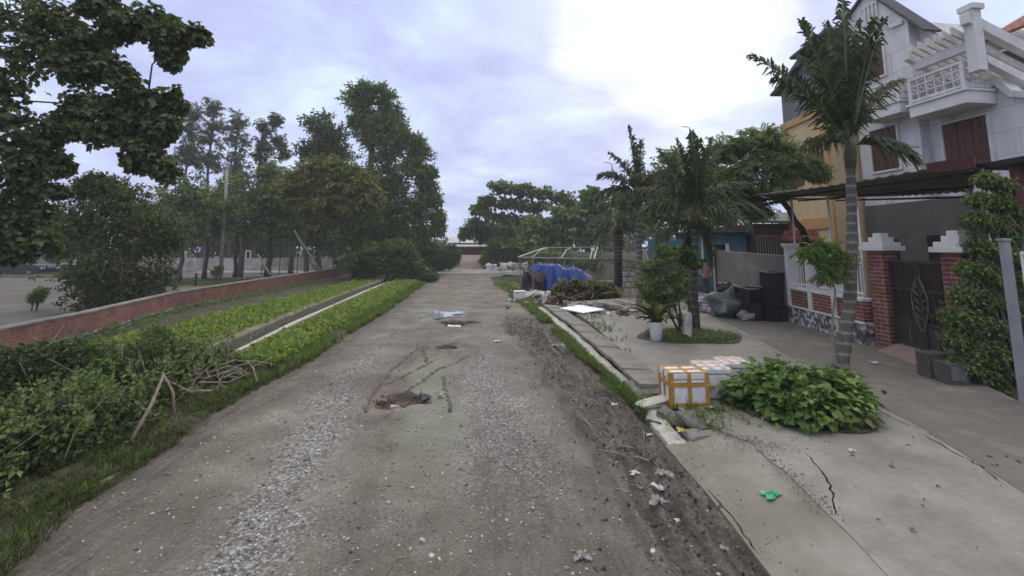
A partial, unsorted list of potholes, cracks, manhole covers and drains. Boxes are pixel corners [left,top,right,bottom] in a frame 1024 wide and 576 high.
crack [807,455,837,516]
crack [926,436,1003,484]
pothole [376,391,432,409]
crack [706,489,759,554]
